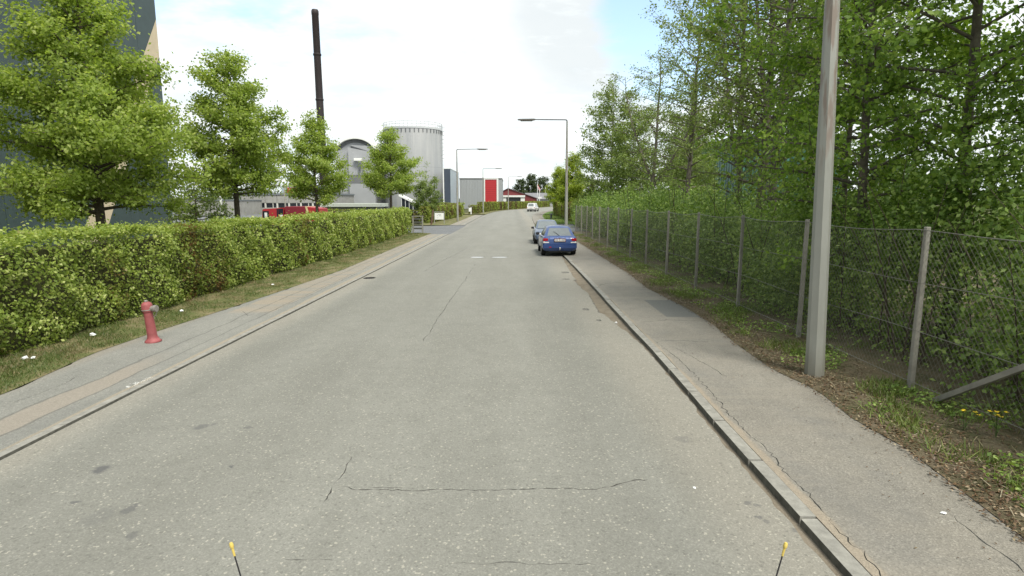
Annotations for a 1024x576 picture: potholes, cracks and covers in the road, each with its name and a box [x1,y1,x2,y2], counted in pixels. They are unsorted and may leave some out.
crack [955,518,1023,572]
crack [325,457,641,501]
